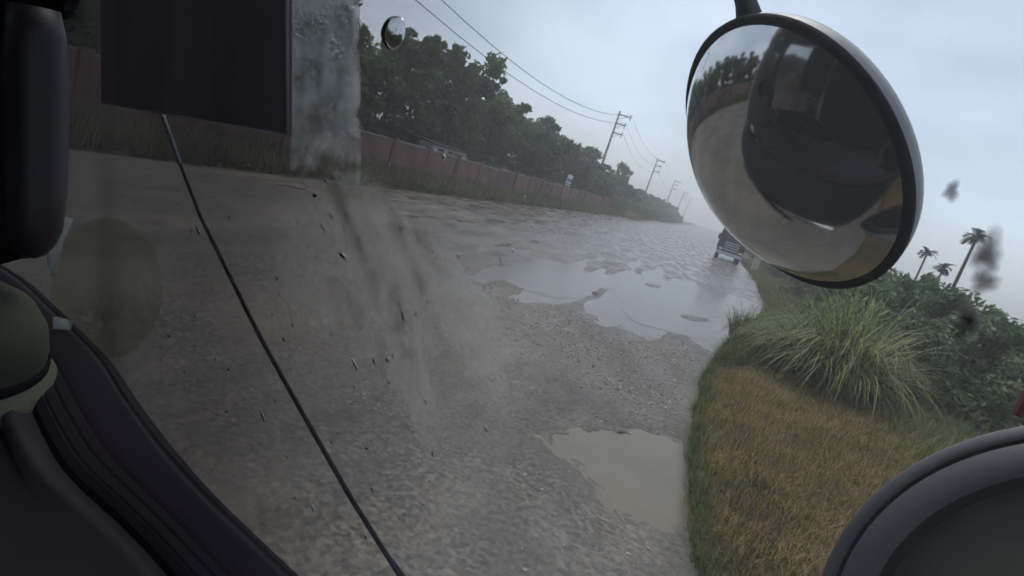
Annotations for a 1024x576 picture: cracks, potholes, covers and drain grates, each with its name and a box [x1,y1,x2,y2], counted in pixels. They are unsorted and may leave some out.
pothole [530,425,692,534]
pothole [614,283,755,340]
pothole [502,266,597,299]
